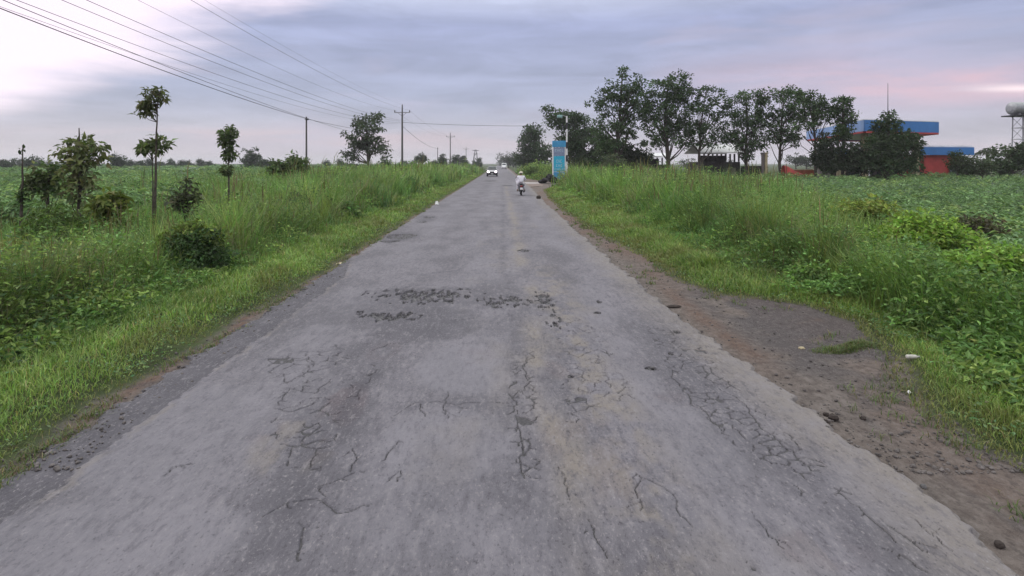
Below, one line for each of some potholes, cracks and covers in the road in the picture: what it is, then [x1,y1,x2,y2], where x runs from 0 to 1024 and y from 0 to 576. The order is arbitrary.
crack [268,346,375,470]
crack [508,359,541,479]
pothole [361,287,501,305]
crack [650,332,953,572]
pothole [476,295,525,309]
pothole [522,292,556,316]
crack [287,450,365,562]
pothole [356,310,423,323]
crack [562,331,635,423]
